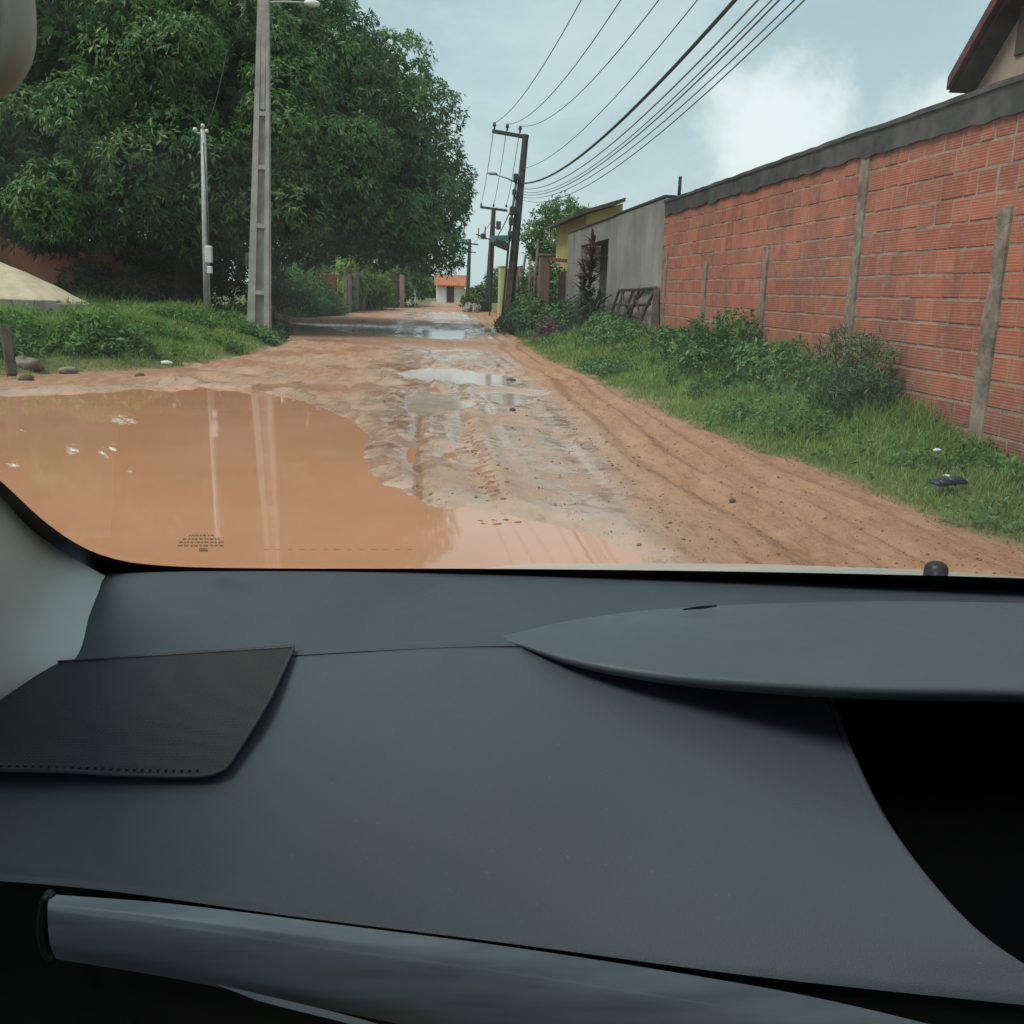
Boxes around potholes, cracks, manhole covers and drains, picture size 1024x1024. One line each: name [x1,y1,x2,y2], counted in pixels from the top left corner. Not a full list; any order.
pothole [300,323,400,334]
pothole [419,327,472,339]
pothole [0,382,655,569]
pothole [384,363,537,386]
